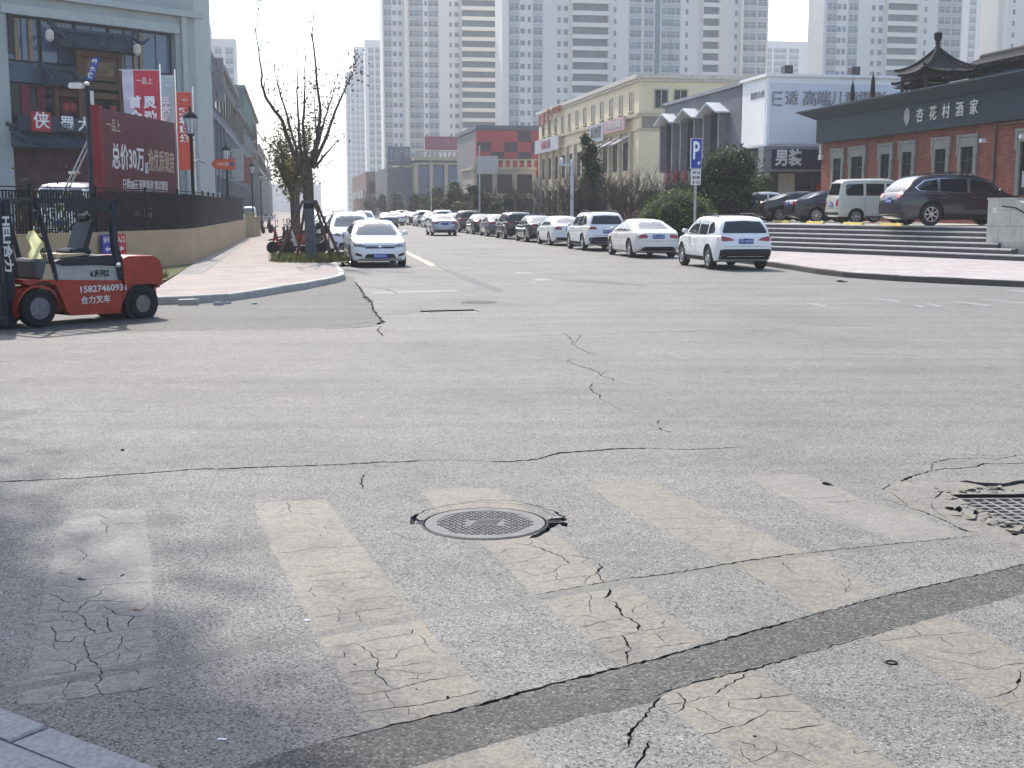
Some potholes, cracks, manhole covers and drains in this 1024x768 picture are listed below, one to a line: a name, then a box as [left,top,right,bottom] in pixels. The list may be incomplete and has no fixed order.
crack [328,455,1024,768]
drain grate [953,494,1024,526]
crack [36,514,155,700]
manhole cover [417,508,563,540]
crack [519,331,686,409]
crack [3,419,735,489]
crack [92,282,415,336]
